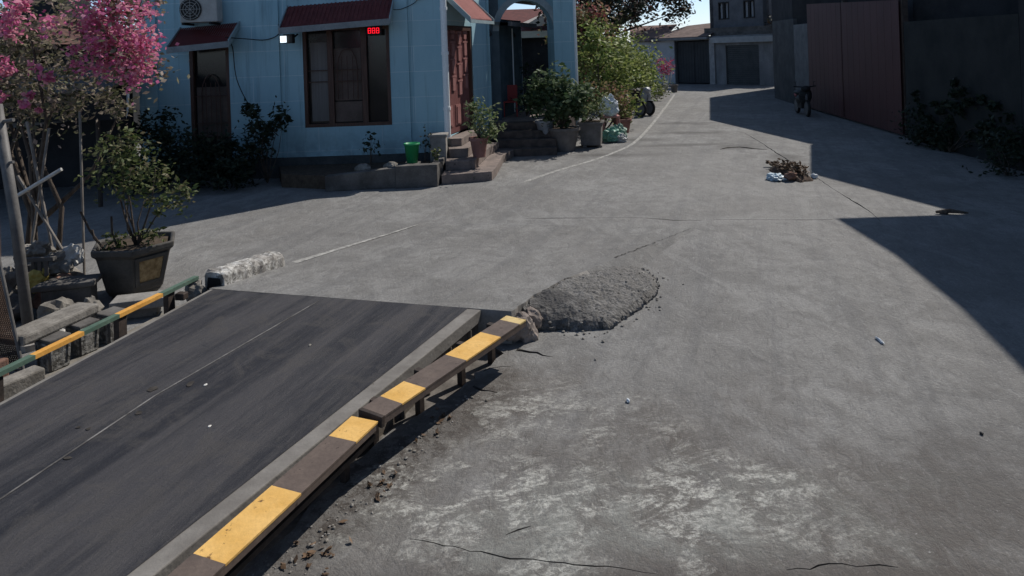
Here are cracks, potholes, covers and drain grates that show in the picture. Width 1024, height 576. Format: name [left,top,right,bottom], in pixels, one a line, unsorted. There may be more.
crack [413,526,656,574]
crack [473,348,552,393]
crack [720,137,789,161]
